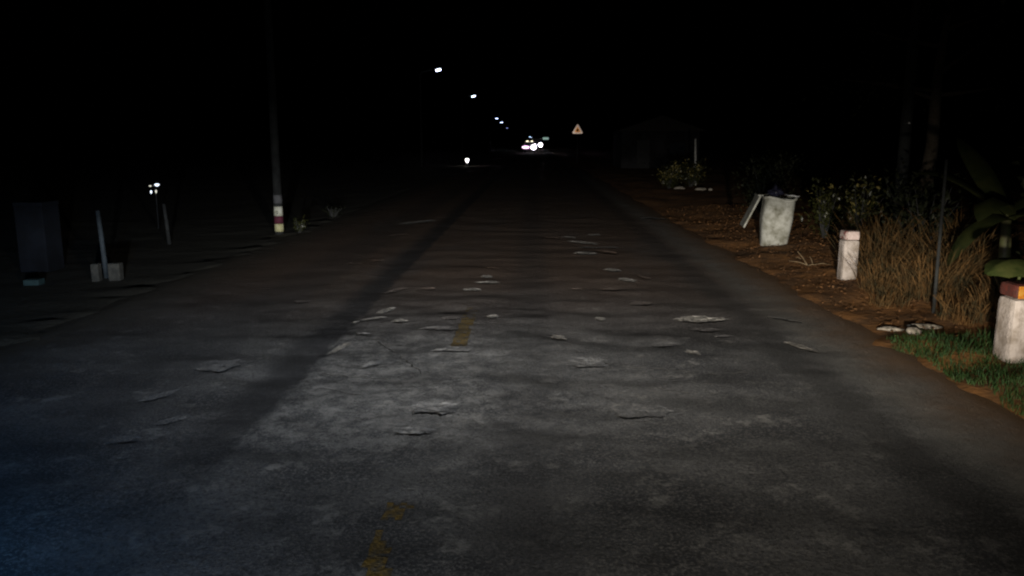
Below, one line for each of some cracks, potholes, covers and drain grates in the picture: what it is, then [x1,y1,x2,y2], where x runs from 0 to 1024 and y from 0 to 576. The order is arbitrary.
crack [320,339,421,395]
pothole [134,389,181,403]
pothole [150,415,191,427]
pothole [562,358,613,368]
pothole [784,341,820,353]
pothole [605,400,676,420]
pothole [194,358,247,373]
pothole [408,399,461,417]
pothole [388,427,440,436]
pothole [673,316,729,324]
pothole [103,435,143,445]
